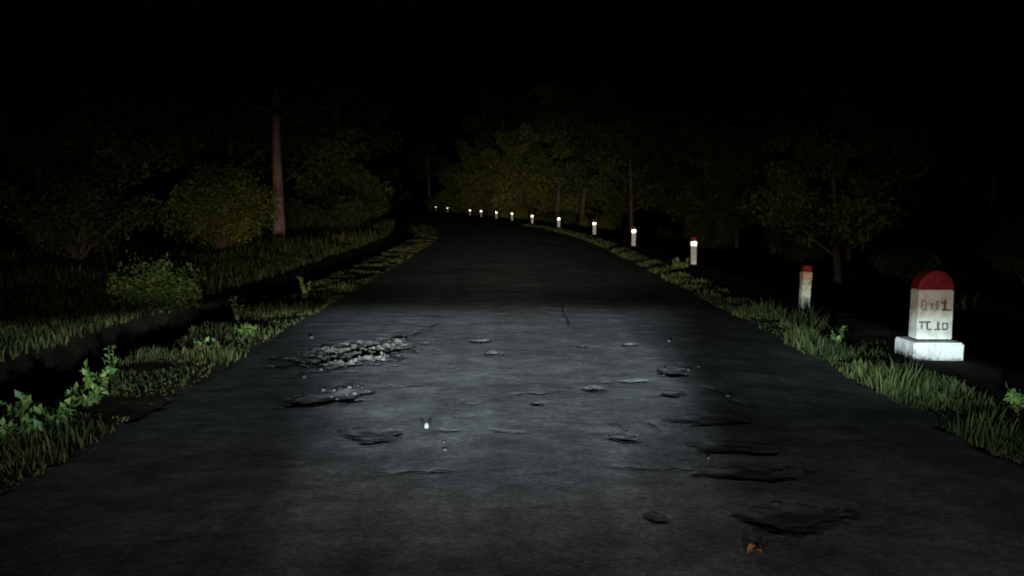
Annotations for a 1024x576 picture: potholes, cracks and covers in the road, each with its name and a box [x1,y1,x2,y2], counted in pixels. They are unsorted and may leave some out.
pothole [263,335,453,373]
pothole [275,388,375,409]
pothole [730,501,861,540]
pothole [582,385,607,393]
pothole [656,365,689,378]
pothole [688,466,817,482]
pothole [642,512,670,522]
pothole [337,428,403,444]
pothole [685,440,787,455]
pothole [608,434,640,443]
